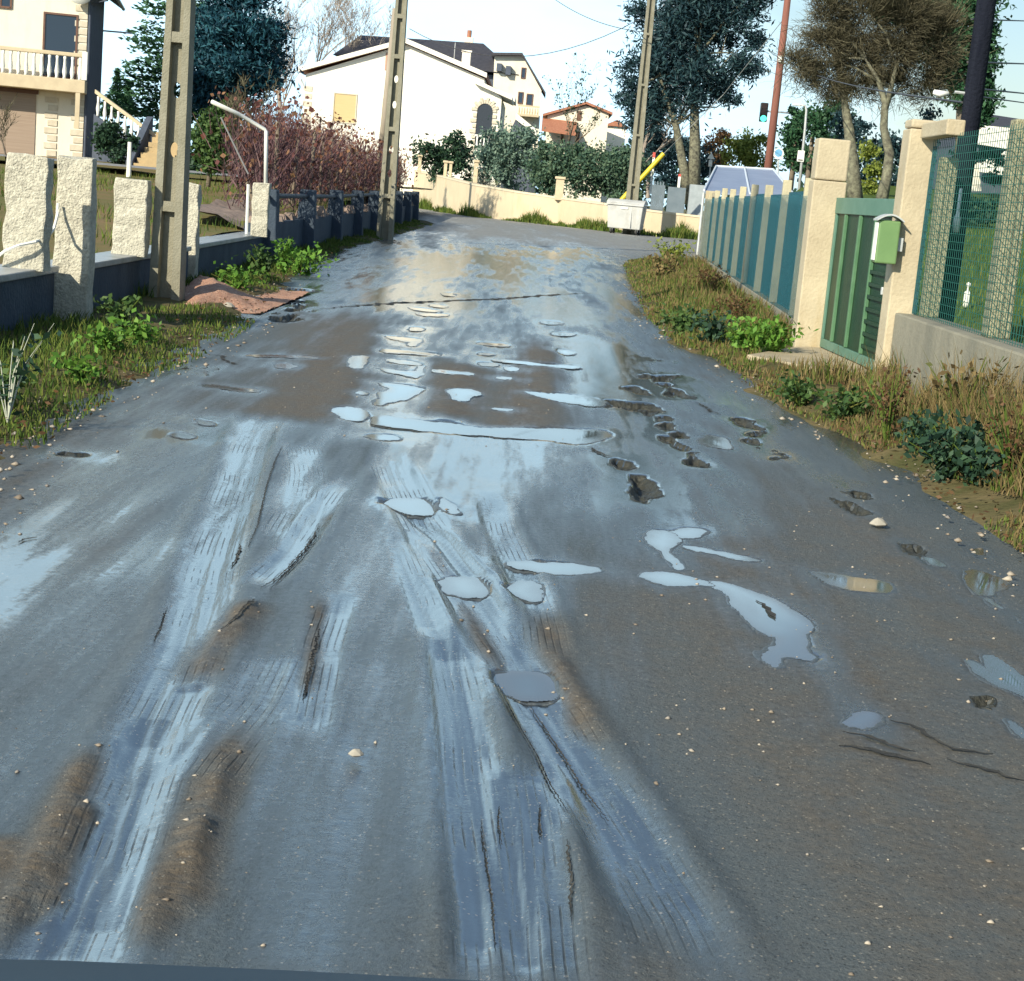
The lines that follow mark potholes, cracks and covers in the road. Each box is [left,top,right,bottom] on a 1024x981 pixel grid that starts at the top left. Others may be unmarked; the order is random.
pothole [897,543,927,559]
pothole [840,491,873,500]
pothole [969,695,997,710]
crack [155,608,168,639]
crack [221,446,319,629]
pothole [829,497,873,516]
crack [320,293,577,309]
pothole [436,576,490,601]
pothole [627,474,664,503]
pothole [506,580,546,604]
pothole [197,384,262,393]
crack [839,719,1023,780]
